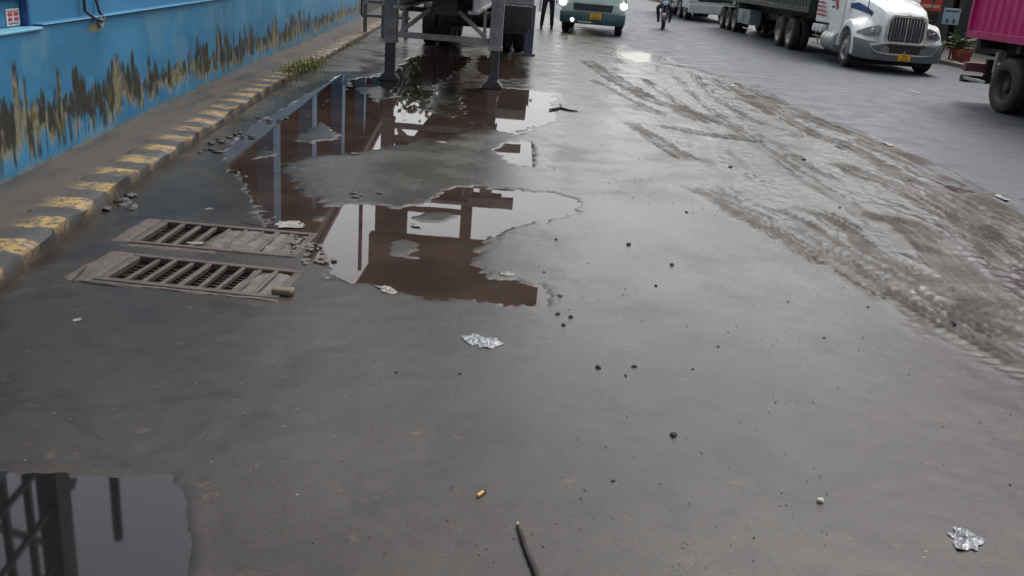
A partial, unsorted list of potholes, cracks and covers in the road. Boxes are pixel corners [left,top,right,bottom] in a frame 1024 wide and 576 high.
drain grate [64,251,305,302]
drain grate [111,219,318,258]
